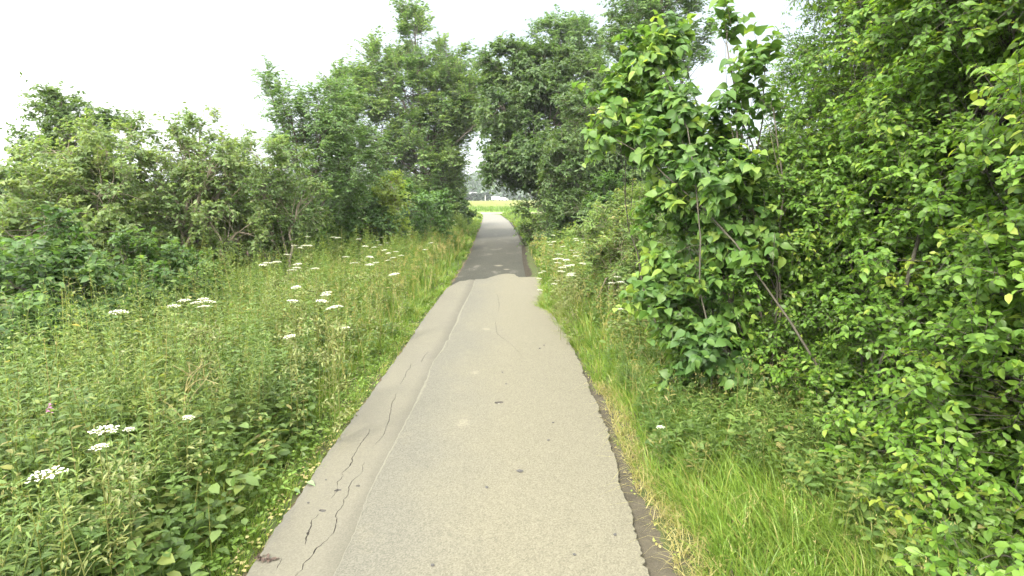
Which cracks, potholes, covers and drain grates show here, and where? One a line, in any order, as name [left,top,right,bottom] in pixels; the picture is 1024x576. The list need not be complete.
crack [277,359,423,576]
